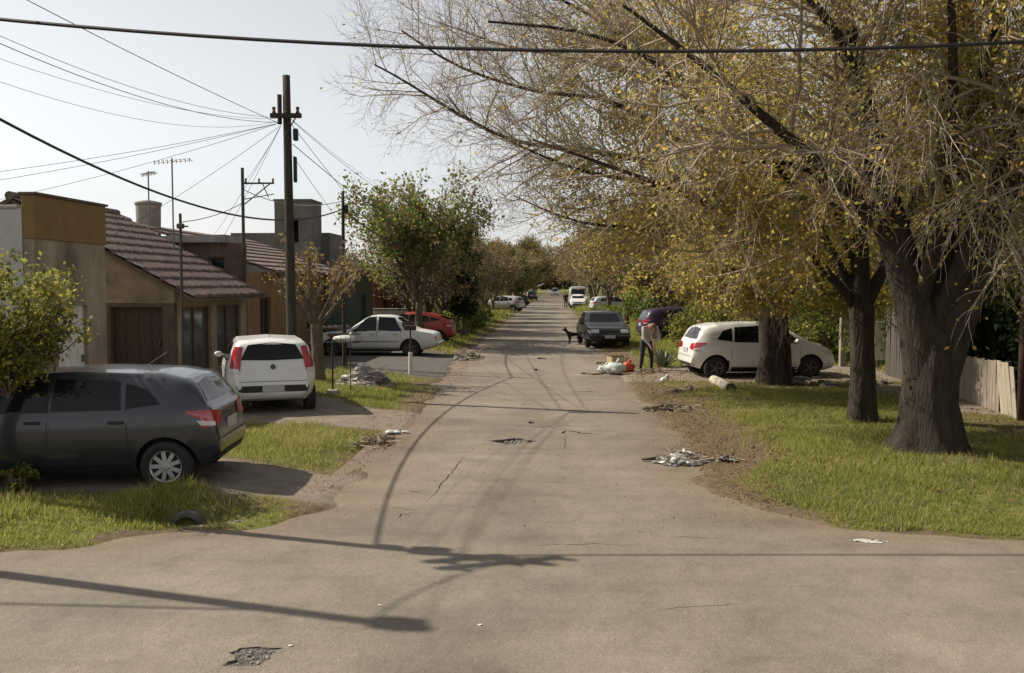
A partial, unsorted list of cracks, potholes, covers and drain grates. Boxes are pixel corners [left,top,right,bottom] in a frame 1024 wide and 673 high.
pothole [223,647,282,667]
crack [393,458,463,519]
